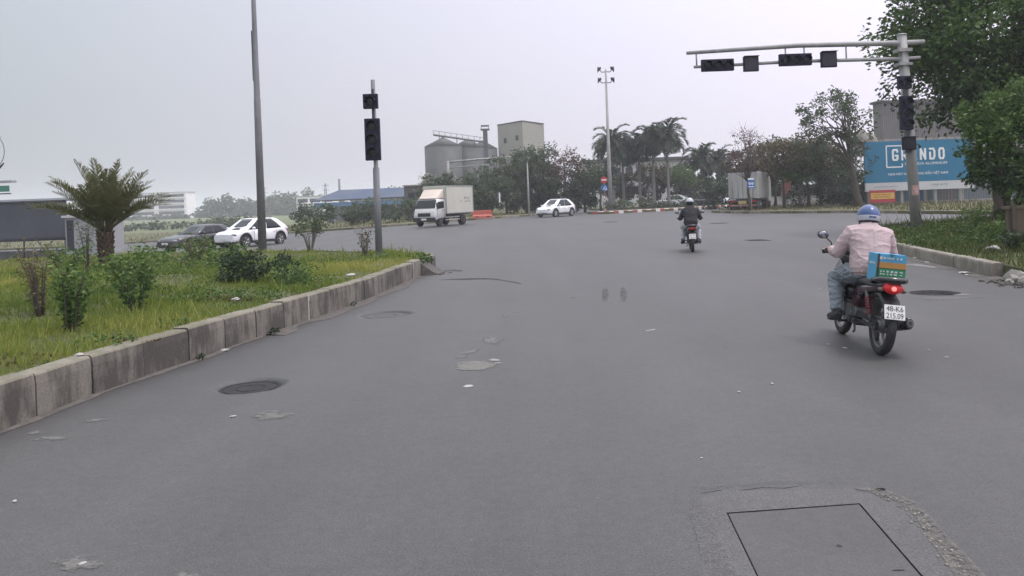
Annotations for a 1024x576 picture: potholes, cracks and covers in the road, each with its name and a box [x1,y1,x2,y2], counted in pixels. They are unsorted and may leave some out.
manhole cover [210,377,290,394]
manhole cover [357,310,416,319]
utility cover [727,504,922,576]
